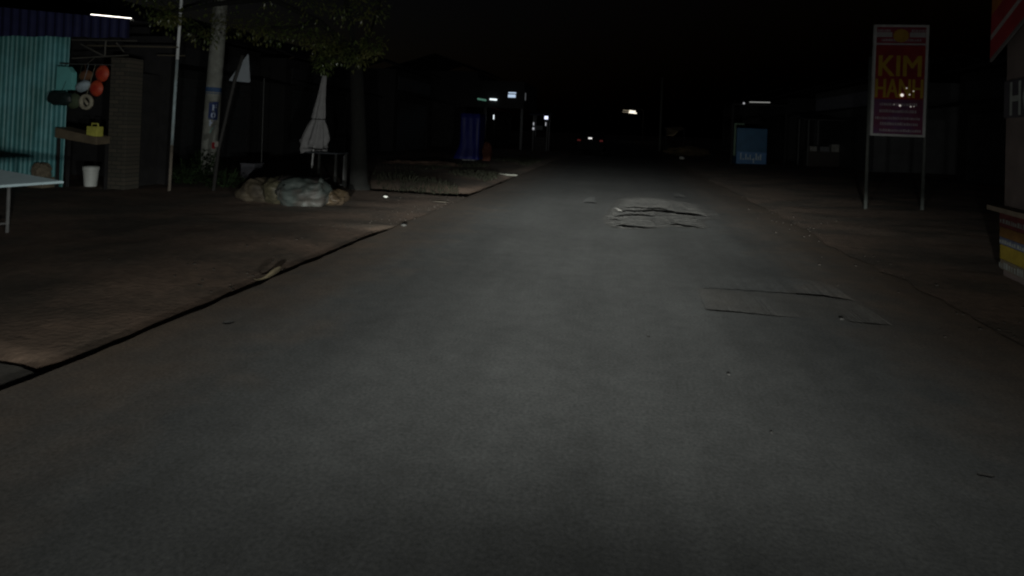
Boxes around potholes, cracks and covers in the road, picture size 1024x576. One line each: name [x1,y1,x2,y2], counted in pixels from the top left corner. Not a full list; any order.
pothole [602,197,722,230]
